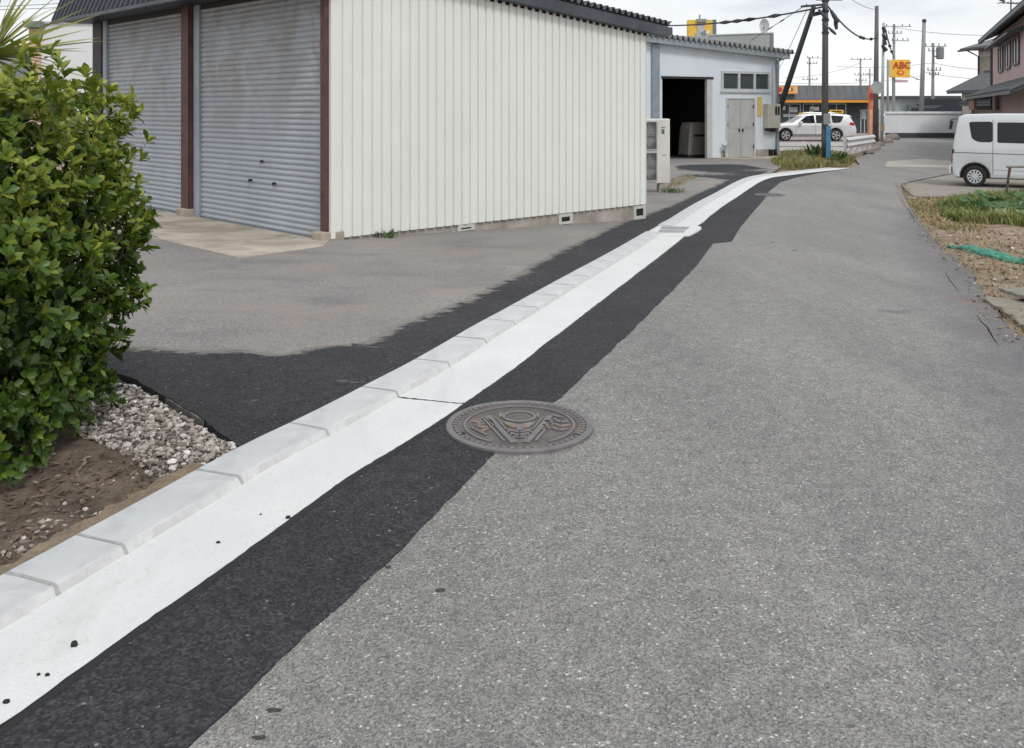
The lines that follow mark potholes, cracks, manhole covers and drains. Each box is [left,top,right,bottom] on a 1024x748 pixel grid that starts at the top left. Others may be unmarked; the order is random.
manhole cover [446,400,594,455]
drain grate [649,225,701,237]
